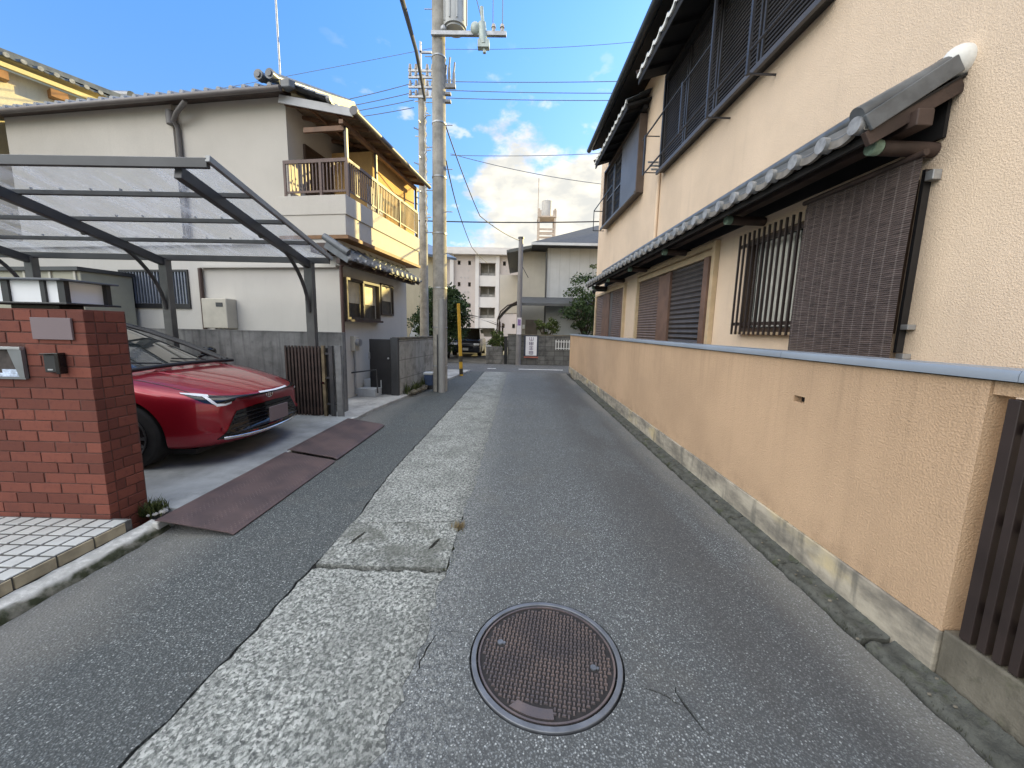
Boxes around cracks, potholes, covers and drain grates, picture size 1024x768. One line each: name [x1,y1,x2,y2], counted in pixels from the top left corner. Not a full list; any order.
crack [121,400,459,768]
manhole cover [471,602,623,736]
